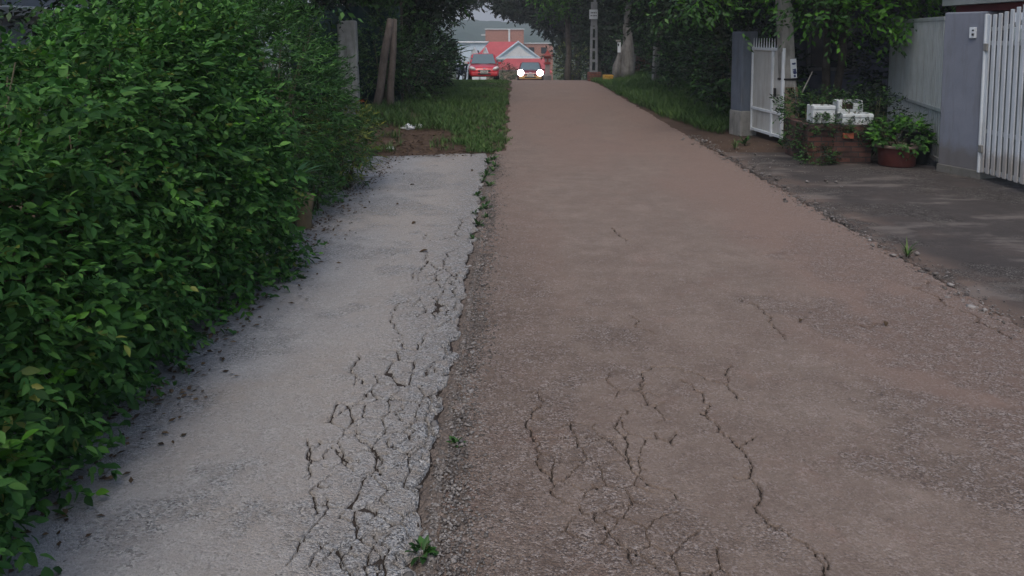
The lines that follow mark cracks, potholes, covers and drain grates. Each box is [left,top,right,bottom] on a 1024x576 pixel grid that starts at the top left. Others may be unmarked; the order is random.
crack [297,222,463,576]
crack [525,374,721,576]
crack [638,368,829,576]
